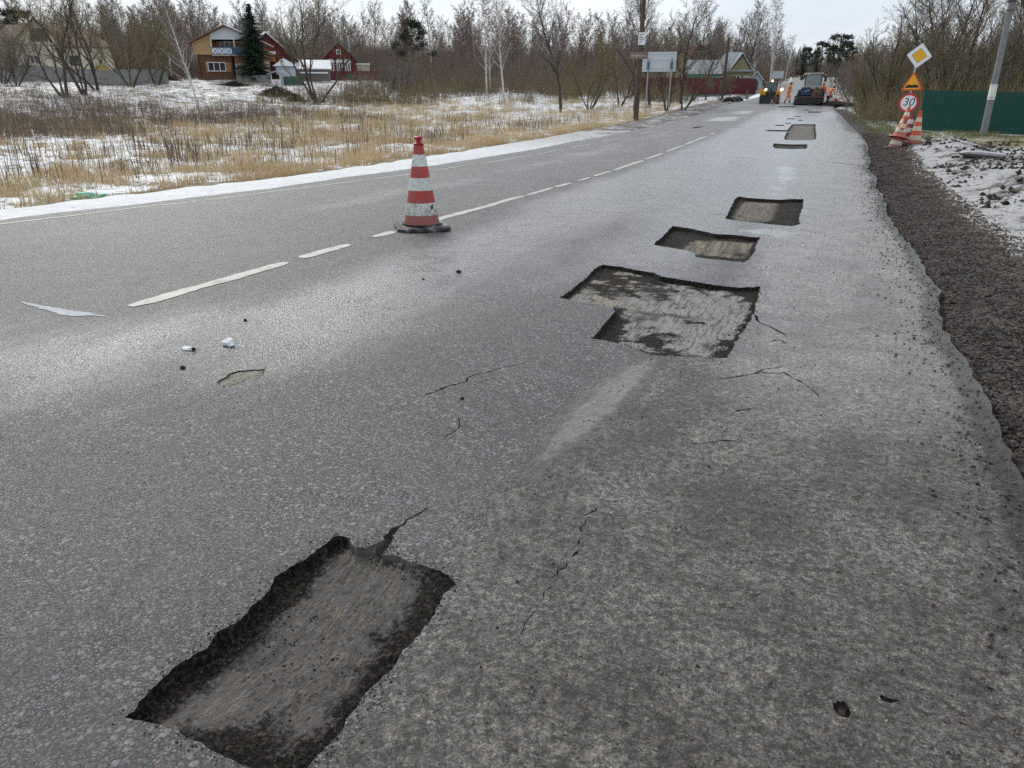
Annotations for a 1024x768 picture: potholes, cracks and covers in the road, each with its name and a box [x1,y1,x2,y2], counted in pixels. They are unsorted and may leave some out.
crack [383,506,429,540]
pothole [725,196,804,226]
pothole [833,701,851,718]
crack [719,366,819,397]
pothole [217,369,265,387]
crack [425,359,531,395]
crack [755,315,787,344]
crack [521,508,597,635]
pothole [552,265,770,360]
pothole [112,529,469,768]
pothole [765,124,817,140]
pothole [654,226,761,262]
